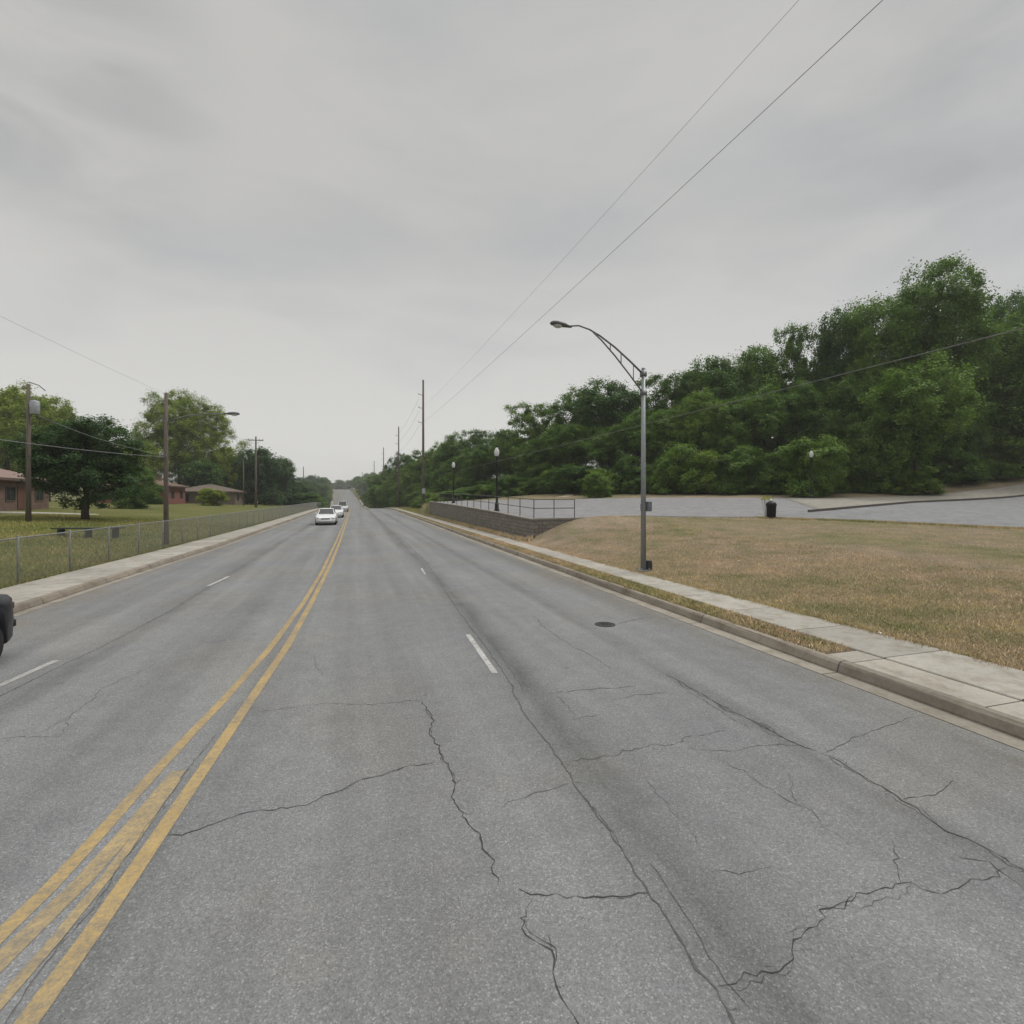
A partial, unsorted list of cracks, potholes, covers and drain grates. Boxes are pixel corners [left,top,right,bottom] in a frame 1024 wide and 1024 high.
crack [520,889,644,1024]
crack [2,664,154,739]
crack [555,685,664,720]
crack [574,674,1024,991]
crack [170,700,499,882]
